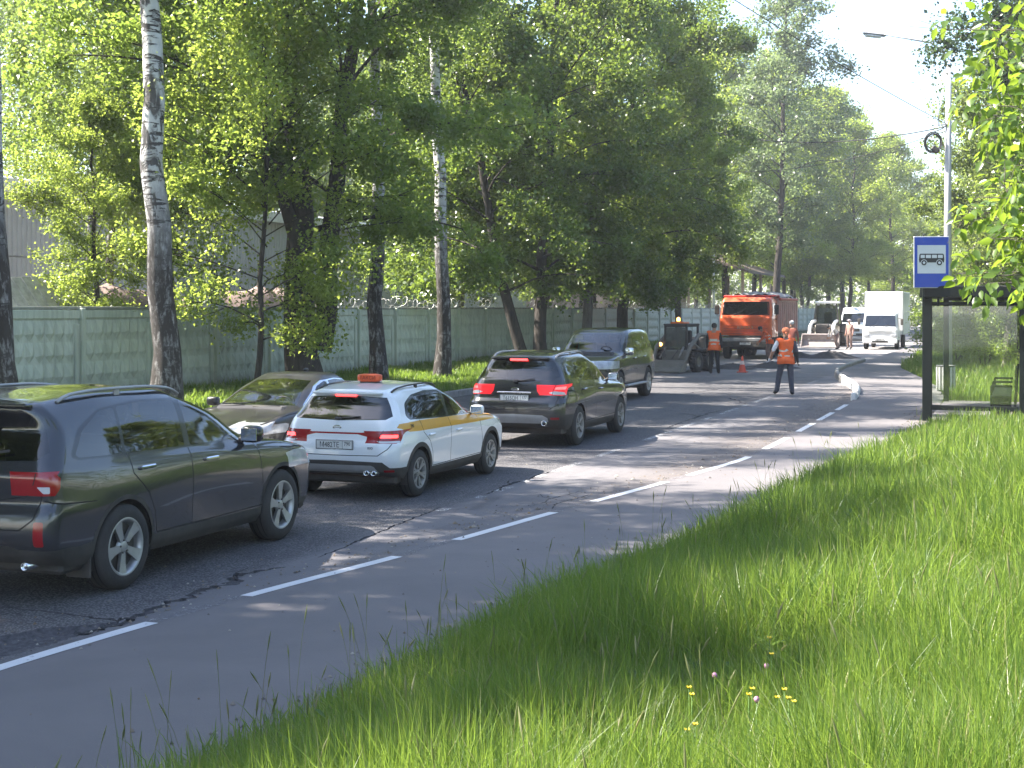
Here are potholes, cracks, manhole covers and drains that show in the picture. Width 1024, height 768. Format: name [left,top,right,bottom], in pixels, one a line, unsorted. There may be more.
crack [530,491,589,509]
crack [3,567,284,636]
